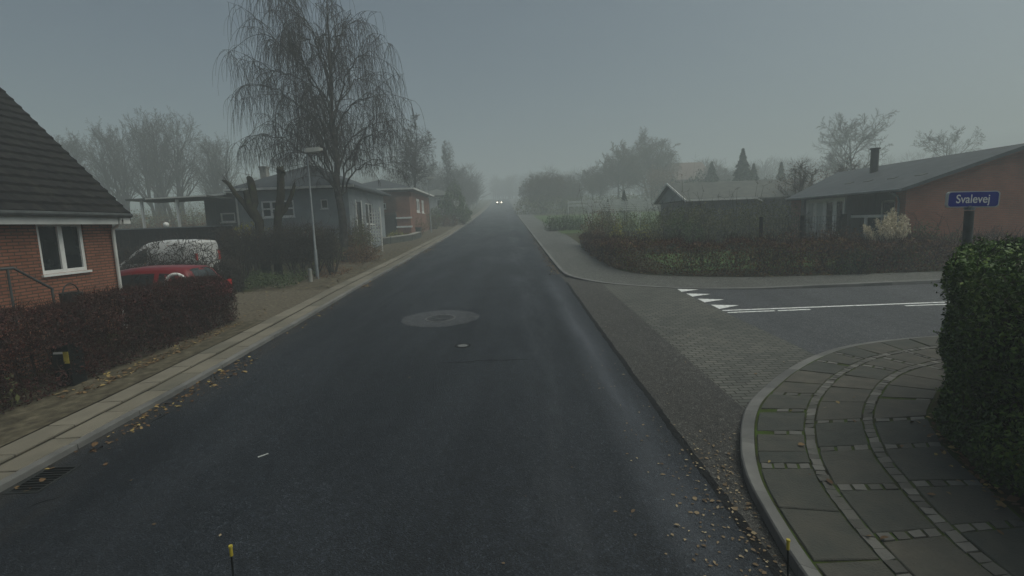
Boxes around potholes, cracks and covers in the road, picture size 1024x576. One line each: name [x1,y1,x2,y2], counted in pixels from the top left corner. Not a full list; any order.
drain grate [2,465,81,494]
